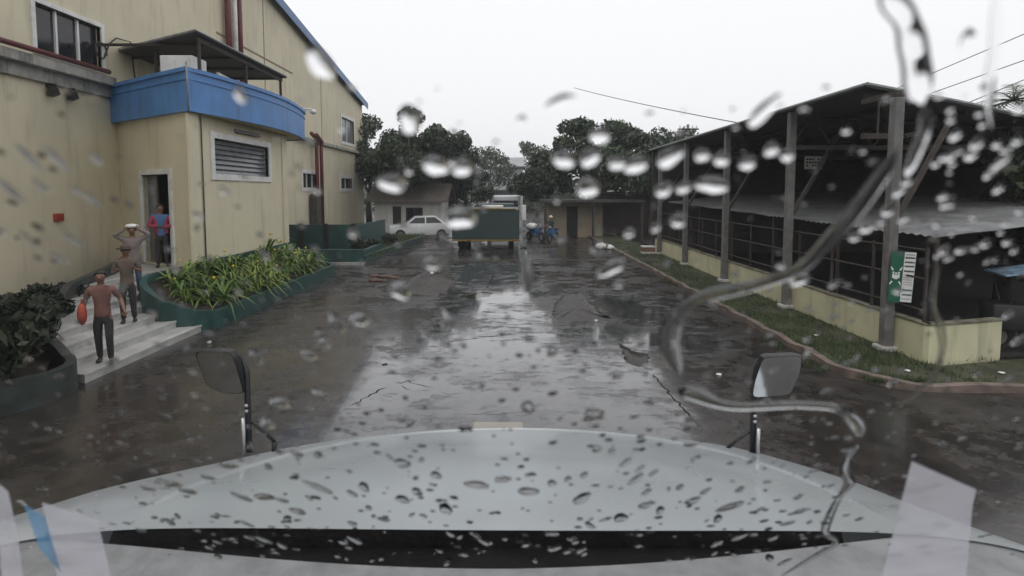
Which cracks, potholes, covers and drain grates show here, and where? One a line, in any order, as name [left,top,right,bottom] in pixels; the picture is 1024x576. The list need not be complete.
crack [653,375,699,425]
crack [351,380,457,406]
